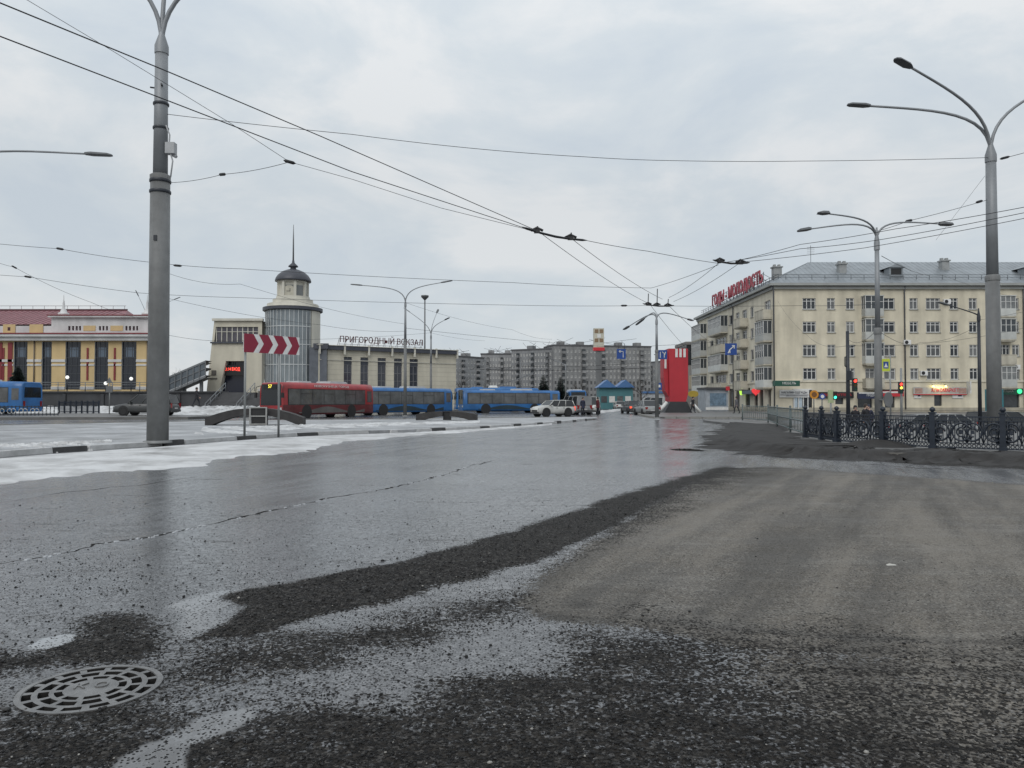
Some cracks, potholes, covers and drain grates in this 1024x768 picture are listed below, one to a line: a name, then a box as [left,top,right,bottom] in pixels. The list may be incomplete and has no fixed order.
crack [0,461,491,564]
manhole cover [13,665,163,715]
